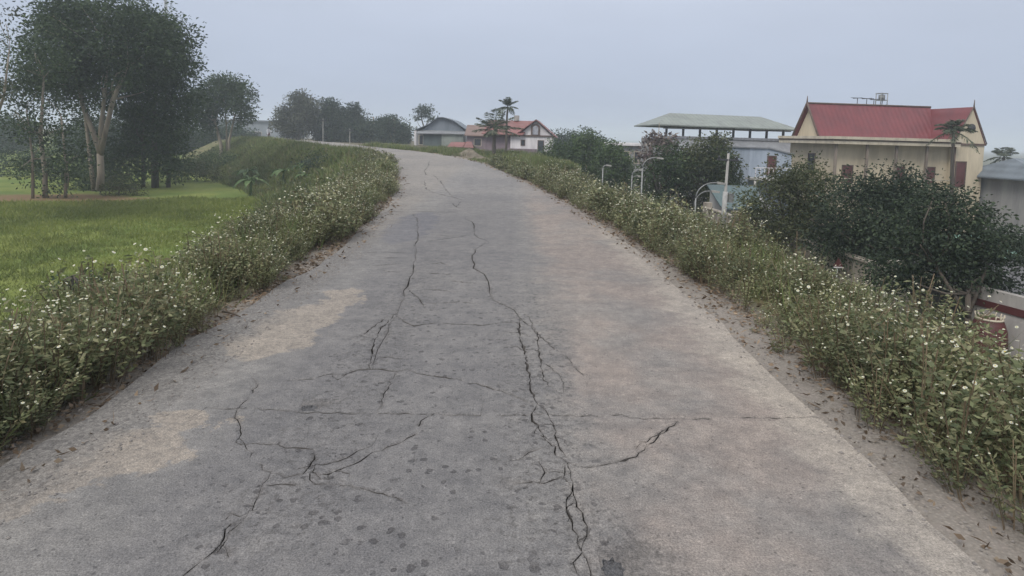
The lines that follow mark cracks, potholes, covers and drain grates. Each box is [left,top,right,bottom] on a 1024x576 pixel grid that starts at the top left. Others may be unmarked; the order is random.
crack [183,385,434,576]
crack [305,216,677,576]
